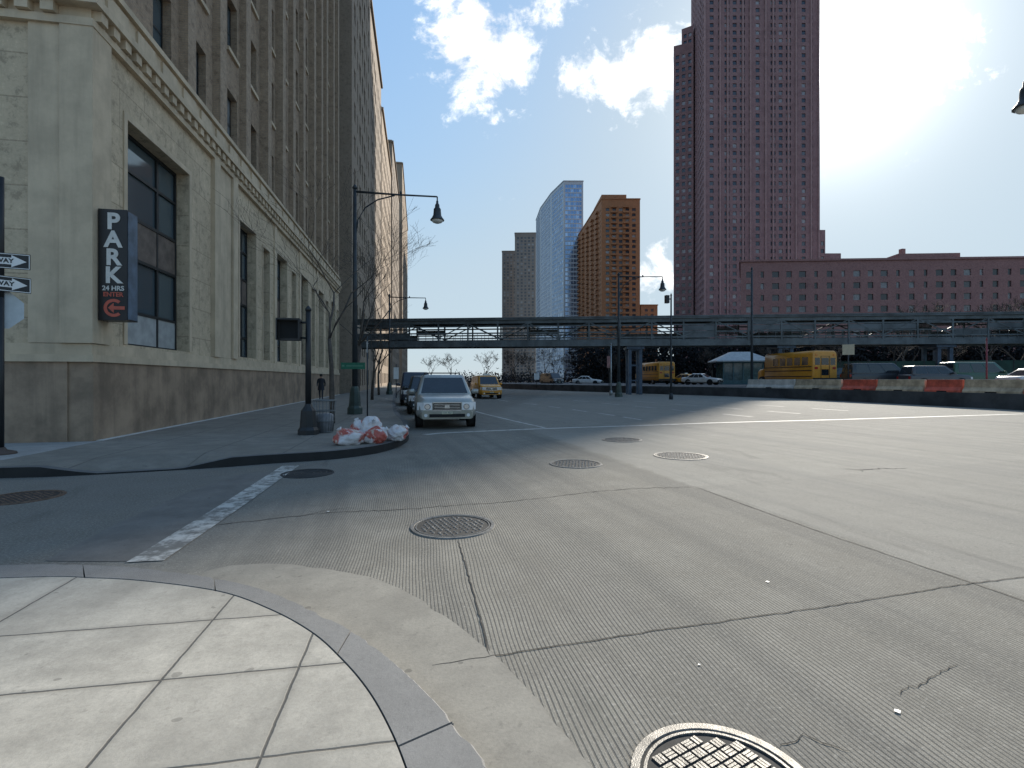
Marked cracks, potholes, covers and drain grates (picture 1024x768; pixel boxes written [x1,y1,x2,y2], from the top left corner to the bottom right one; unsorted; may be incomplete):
crack [900,664,957,695]
manhole cover [0,490,67,506]
manhole cover [549,459,603,468]
manhole cover [629,723,803,768]
manhole cover [410,514,495,539]
manhole cover [280,469,334,479]
crack [779,733,850,751]
manhole cover [653,452,709,460]
